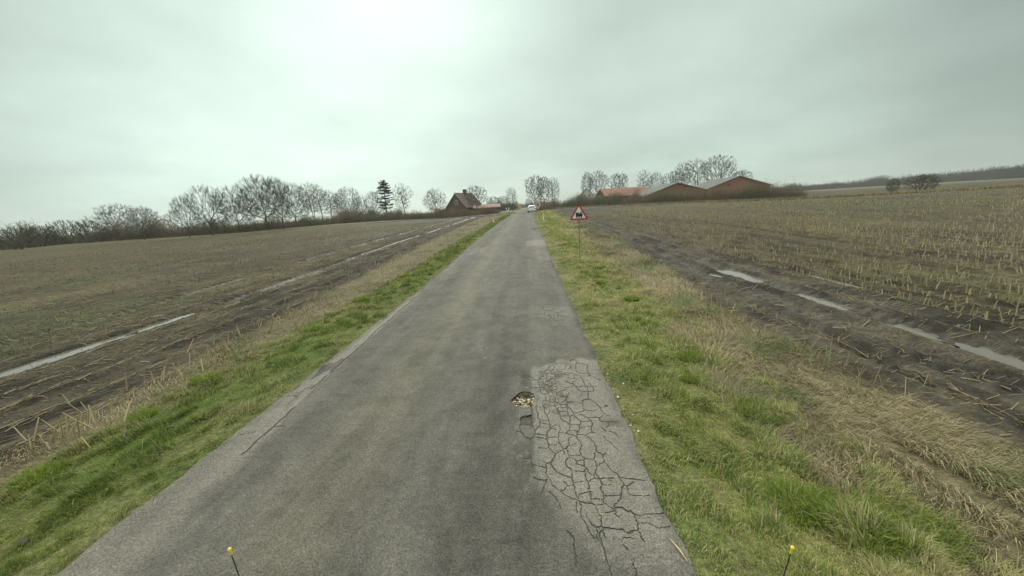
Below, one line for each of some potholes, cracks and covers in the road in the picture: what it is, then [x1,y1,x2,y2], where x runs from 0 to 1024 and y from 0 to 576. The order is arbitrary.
crack [517,359,671,576]
pothole [511,391,535,407]
pothole [519,414,532,425]
